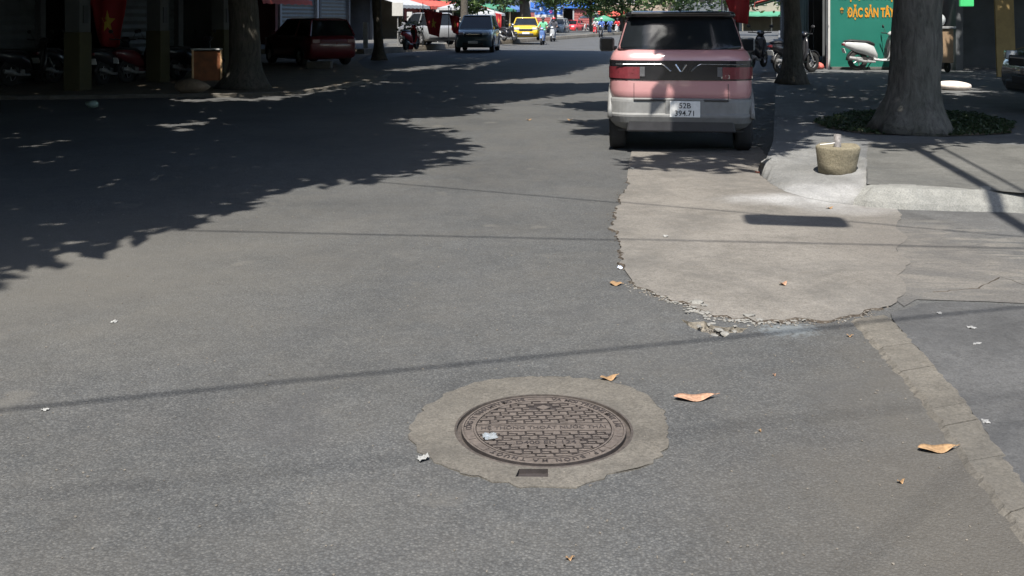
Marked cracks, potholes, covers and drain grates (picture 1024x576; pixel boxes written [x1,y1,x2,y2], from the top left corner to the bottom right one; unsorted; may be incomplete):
manhole cover [408,376,669,489]
crack [607,181,883,324]
crack [936,277,1023,292]
